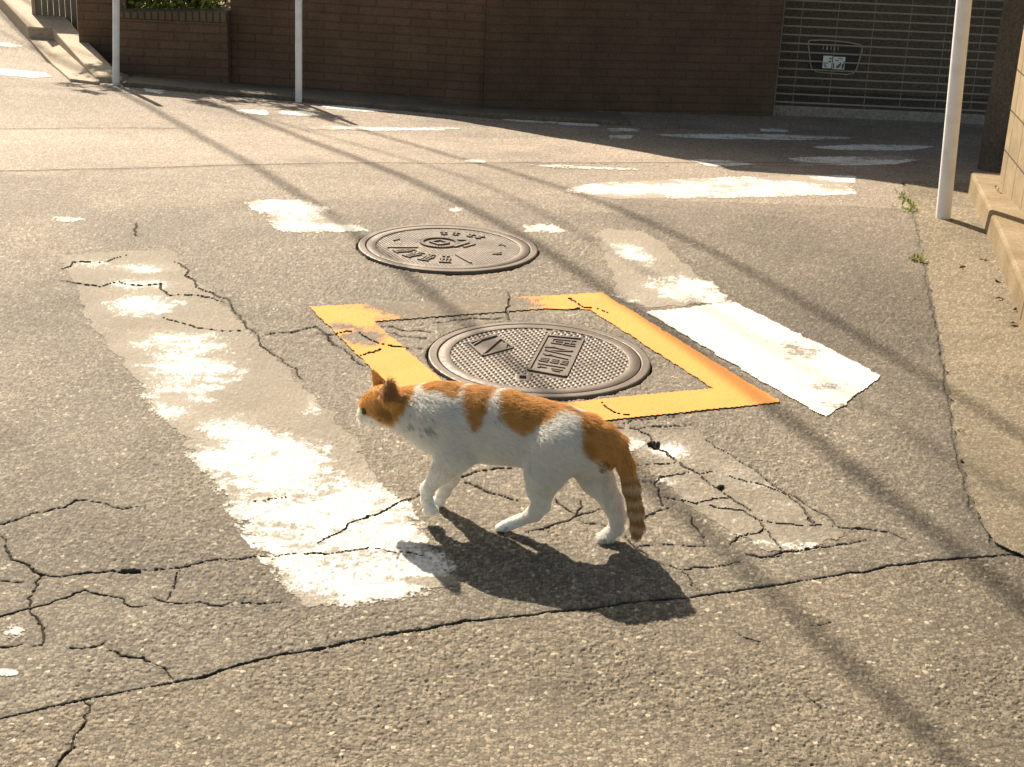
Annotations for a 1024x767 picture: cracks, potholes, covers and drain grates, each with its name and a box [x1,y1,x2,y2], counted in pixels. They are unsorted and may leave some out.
manhole cover [358,224,538,276]
crack [0,554,1023,767]
manhole cover [428,321,651,402]
crack [60,255,511,379]
crack [0,500,289,650]
crack [627,417,906,591]
